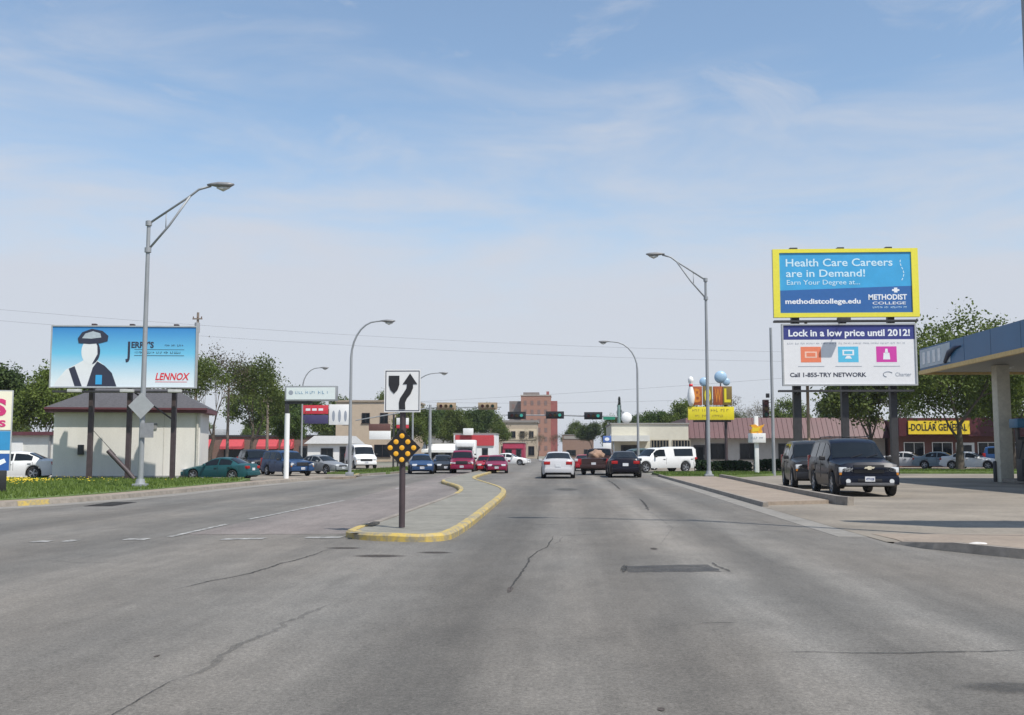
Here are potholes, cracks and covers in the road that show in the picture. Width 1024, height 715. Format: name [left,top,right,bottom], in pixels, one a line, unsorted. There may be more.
crack [111,679,174,715]
crack [510,537,553,589]
crack [181,549,329,588]
